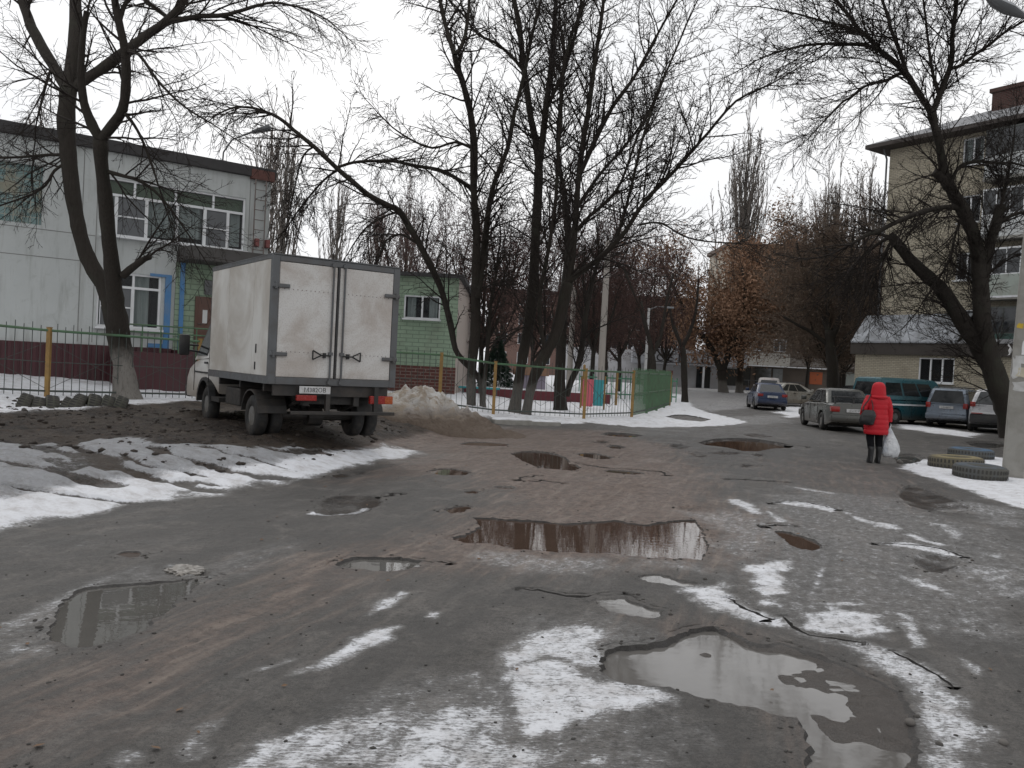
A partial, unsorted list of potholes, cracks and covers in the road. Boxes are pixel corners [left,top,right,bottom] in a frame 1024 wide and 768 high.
pothole [695,438,797,452]
pothole [894,484,975,515]
pothole [109,550,151,559]
pothole [904,552,969,574]
crack [884,651,963,690]
pothole [446,516,717,561]
crack [518,588,626,601]
pothole [440,504,478,514]
pothole [306,493,389,517]
pothole [327,555,440,574]
pothole [36,576,218,652]
pothole [425,468,475,476]
